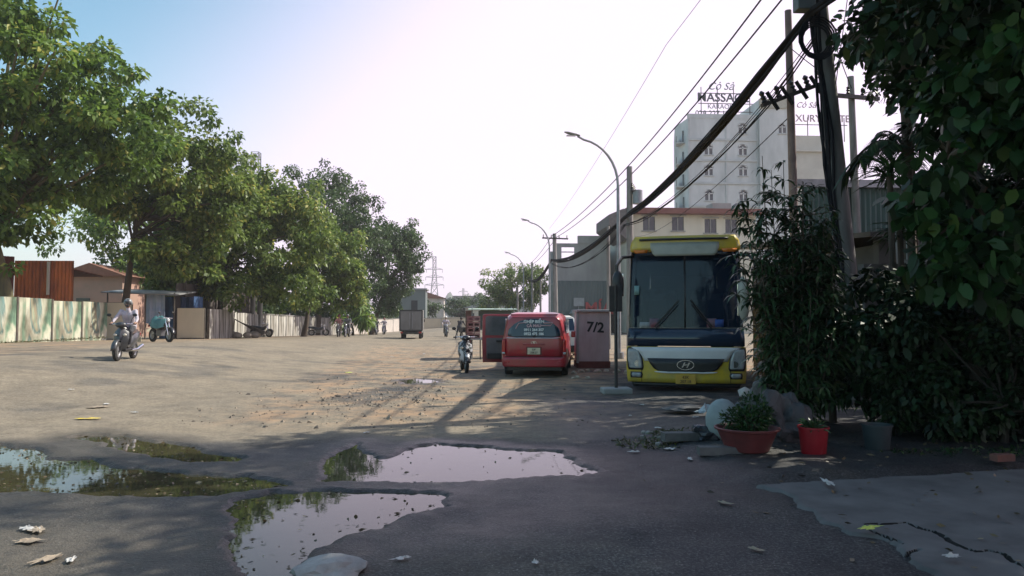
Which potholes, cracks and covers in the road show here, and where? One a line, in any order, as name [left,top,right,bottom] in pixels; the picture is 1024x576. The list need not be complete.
pothole [314,441,609,483]
pothole [215,486,454,576]
crack [864,522,1022,567]
pothole [0,442,295,498]
pothole [65,433,250,462]
